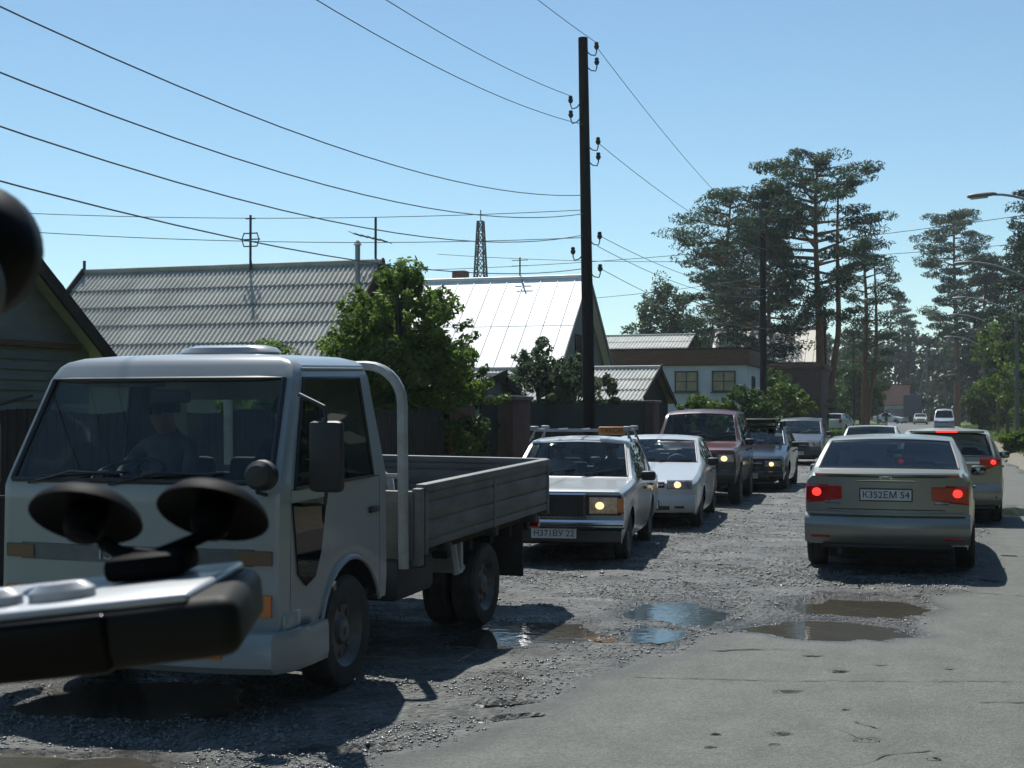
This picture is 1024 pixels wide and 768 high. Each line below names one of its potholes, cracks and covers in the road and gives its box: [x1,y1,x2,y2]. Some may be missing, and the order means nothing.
crack [833,720,935,764]
pothole [469,699,549,707]
pothole [780,593,947,619]
pothole [612,597,738,629]
pothole [462,712,547,724]
pothole [620,624,694,646]
pothole [430,617,607,651]
pothole [725,615,934,642]
